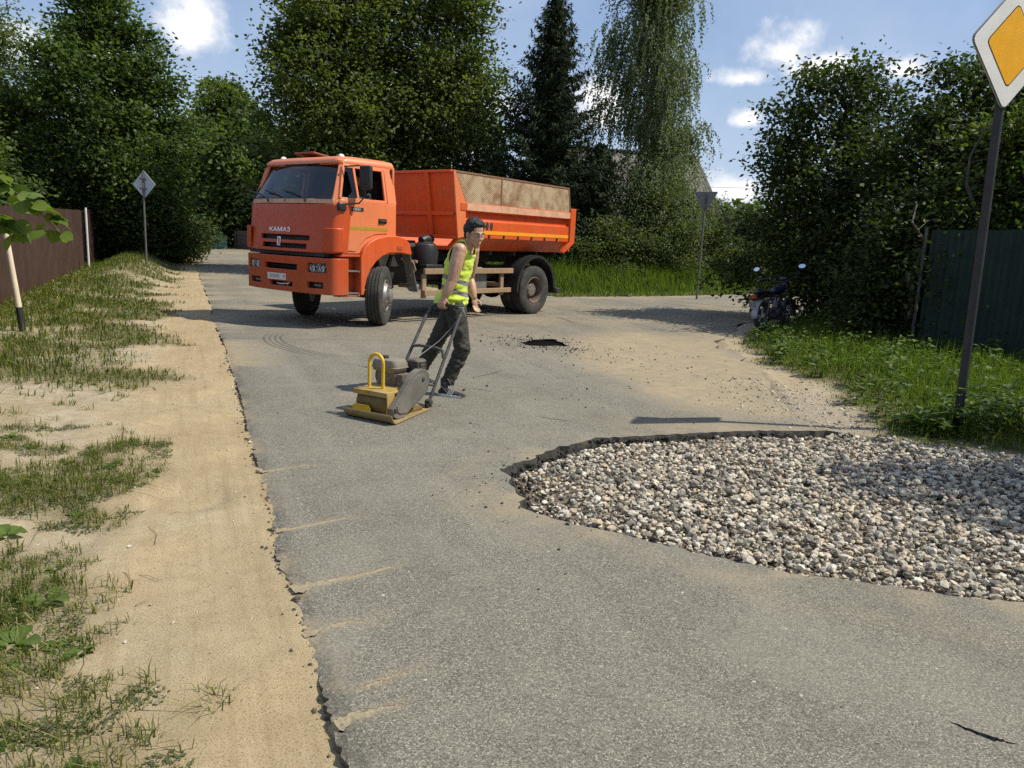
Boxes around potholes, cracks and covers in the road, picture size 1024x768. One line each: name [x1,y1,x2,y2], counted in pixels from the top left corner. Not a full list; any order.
crack [290,566,397,593]
pothole [504,430,1024,602]
crack [271,516,356,534]
crack [259,464,312,473]
crack [302,620,363,638]
crack [327,671,406,739]
